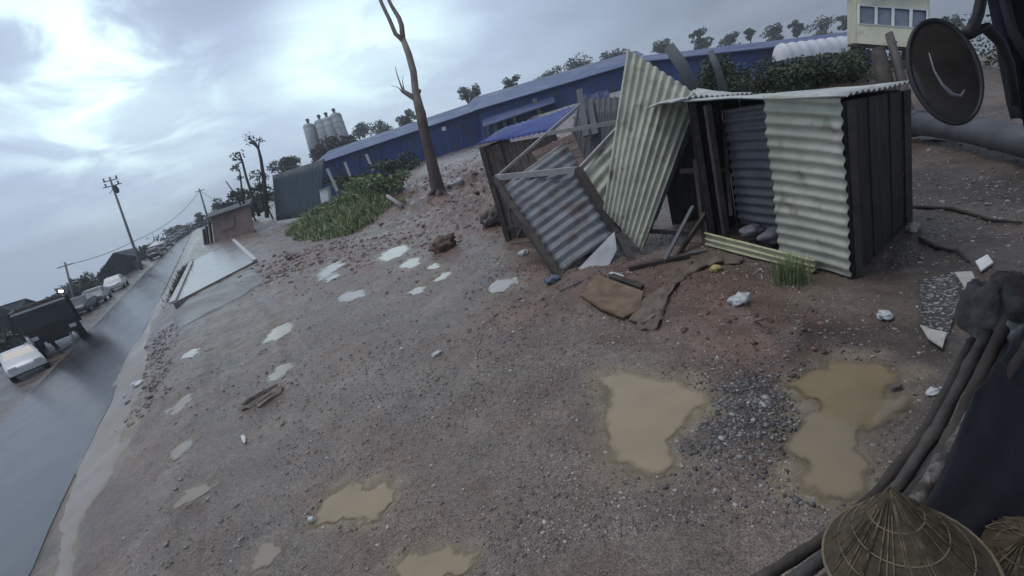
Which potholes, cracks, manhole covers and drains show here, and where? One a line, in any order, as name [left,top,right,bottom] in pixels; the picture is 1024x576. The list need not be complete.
pothole [387,543,485,576]
pothole [313,477,405,529]
pothole [592,370,717,477]
pothole [780,359,915,509]
